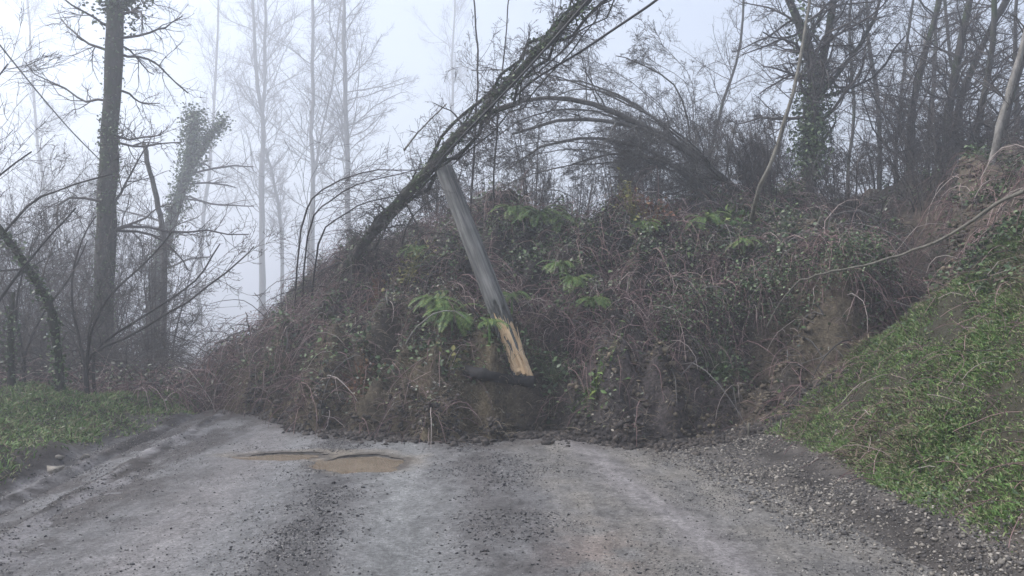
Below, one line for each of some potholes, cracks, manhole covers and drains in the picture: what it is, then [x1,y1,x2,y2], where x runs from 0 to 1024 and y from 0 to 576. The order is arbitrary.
pothole [309,454,406,474]
pothole [232,452,328,461]
